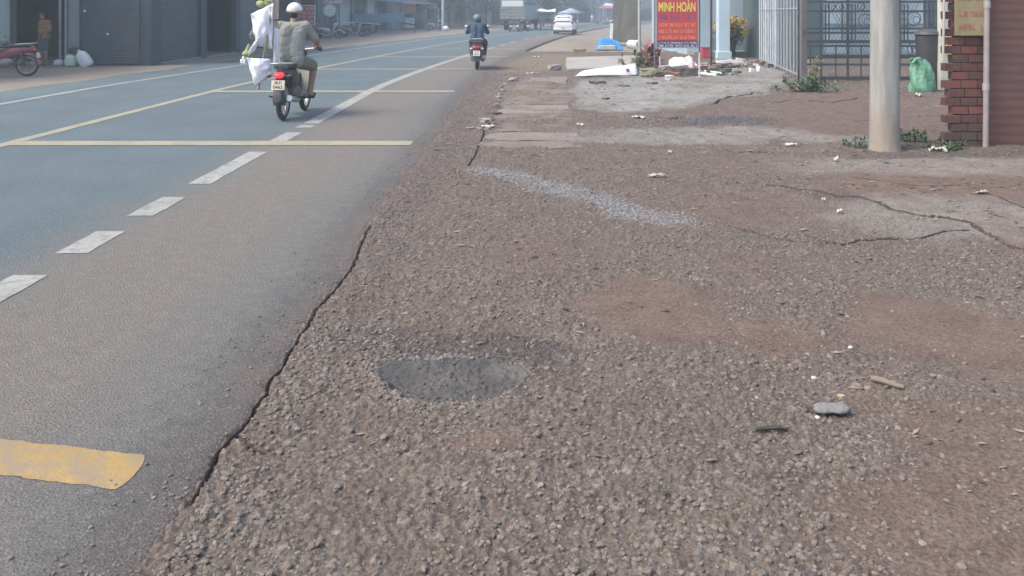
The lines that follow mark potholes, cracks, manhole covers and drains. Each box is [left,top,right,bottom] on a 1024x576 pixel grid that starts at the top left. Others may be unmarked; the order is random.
crack [715,92,857,104]
crack [192,225,371,503]
crack [736,177,1024,250]
crack [469,114,502,166]
